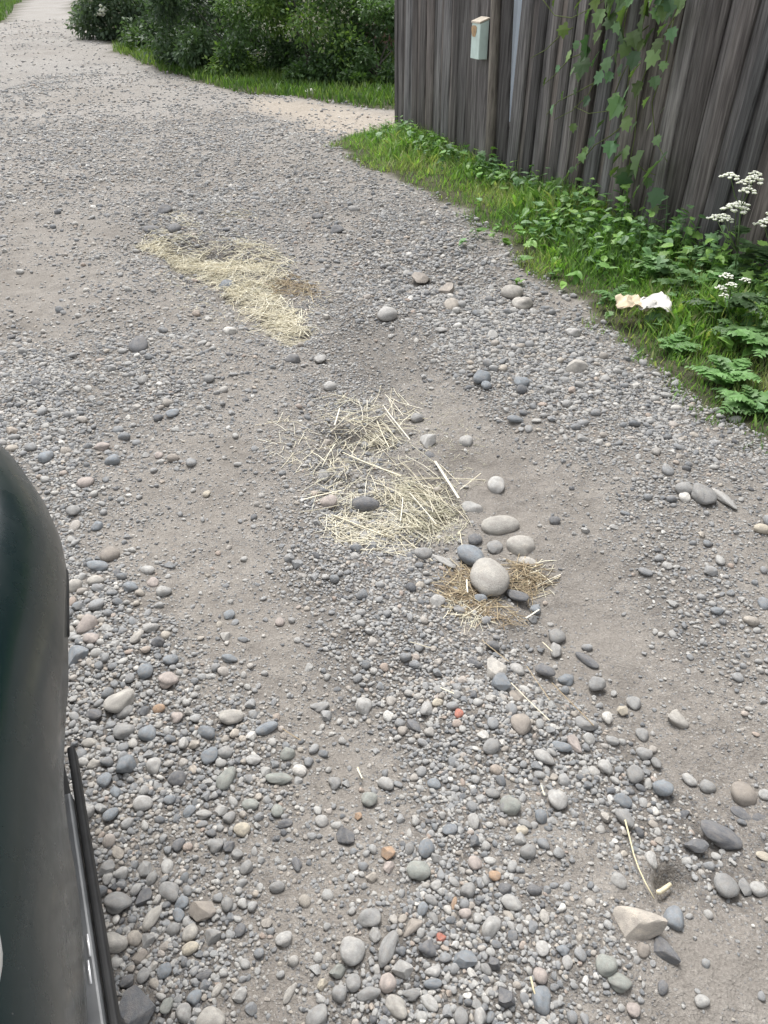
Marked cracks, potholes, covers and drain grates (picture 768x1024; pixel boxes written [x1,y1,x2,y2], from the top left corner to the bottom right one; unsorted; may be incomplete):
pothole [641,860,701,907]
pothole [304,411,489,565]
